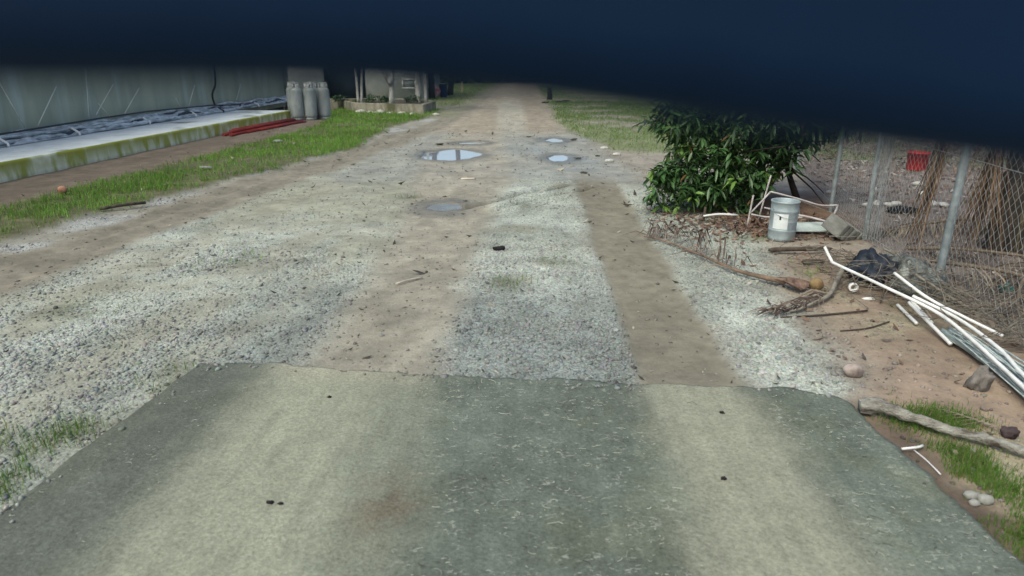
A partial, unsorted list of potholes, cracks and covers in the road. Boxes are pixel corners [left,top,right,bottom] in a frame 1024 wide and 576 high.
pothole [412,199,476,216]
pothole [411,148,491,163]
pothole [540,153,576,164]
